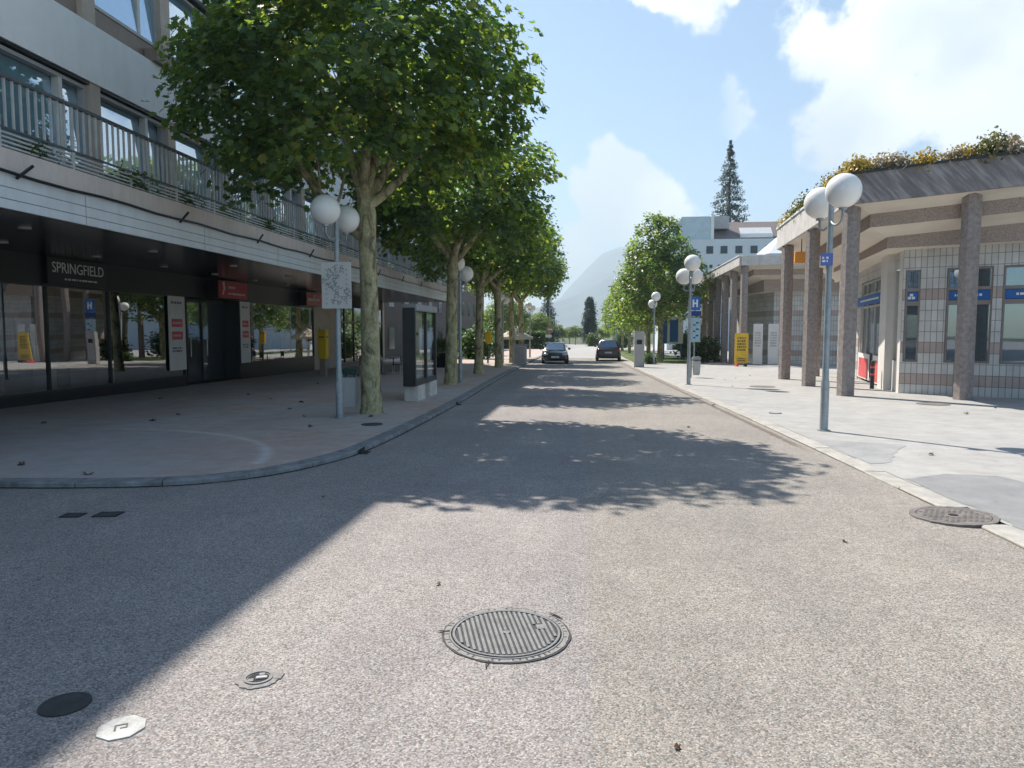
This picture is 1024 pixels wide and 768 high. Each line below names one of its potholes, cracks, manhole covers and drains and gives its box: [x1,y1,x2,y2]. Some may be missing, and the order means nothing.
utility cover [37,692,92,717]
utility cover [96,715,146,742]
manhole cover [909,506,1000,528]
utility cover [235,668,285,690]
manhole cover [442,608,571,664]
